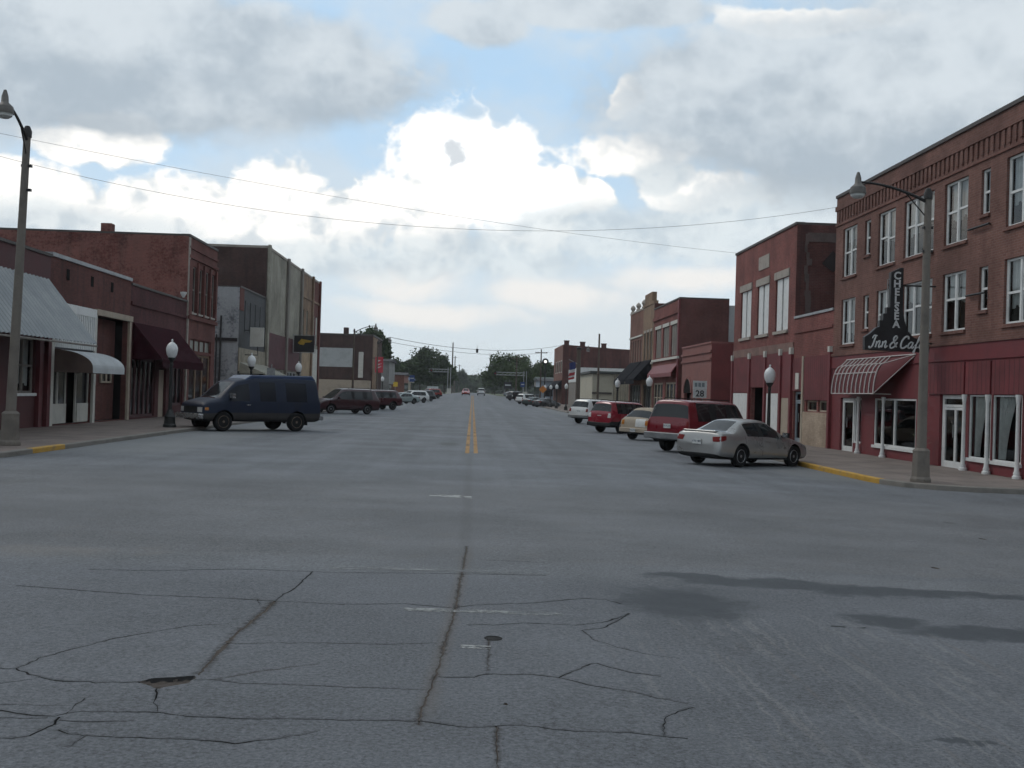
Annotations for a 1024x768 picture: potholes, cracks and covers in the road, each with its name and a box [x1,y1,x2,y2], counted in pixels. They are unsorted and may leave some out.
crack [0,546,693,768]
pothole [139,676,196,689]
